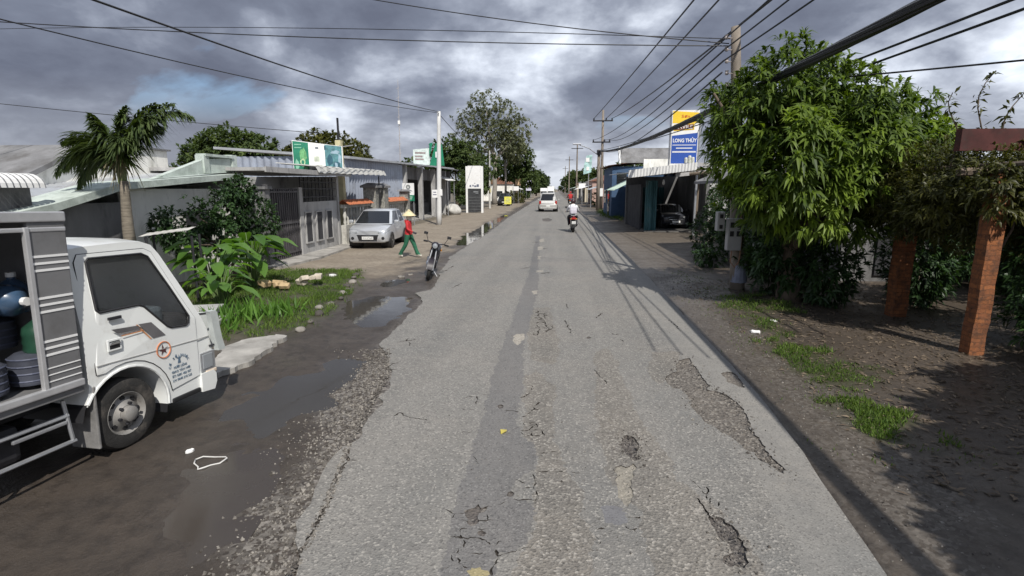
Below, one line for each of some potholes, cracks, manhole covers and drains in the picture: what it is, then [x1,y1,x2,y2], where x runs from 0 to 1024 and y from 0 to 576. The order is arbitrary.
pothole [464,504,487,526]
crack [693,481,720,517]
pothole [620,435,641,461]
pothole [708,516,749,568]
crack [298,450,355,558]
crack [464,386,577,516]
crack [443,502,527,576]
pothole [665,358,784,473]
crack [530,304,571,335]
